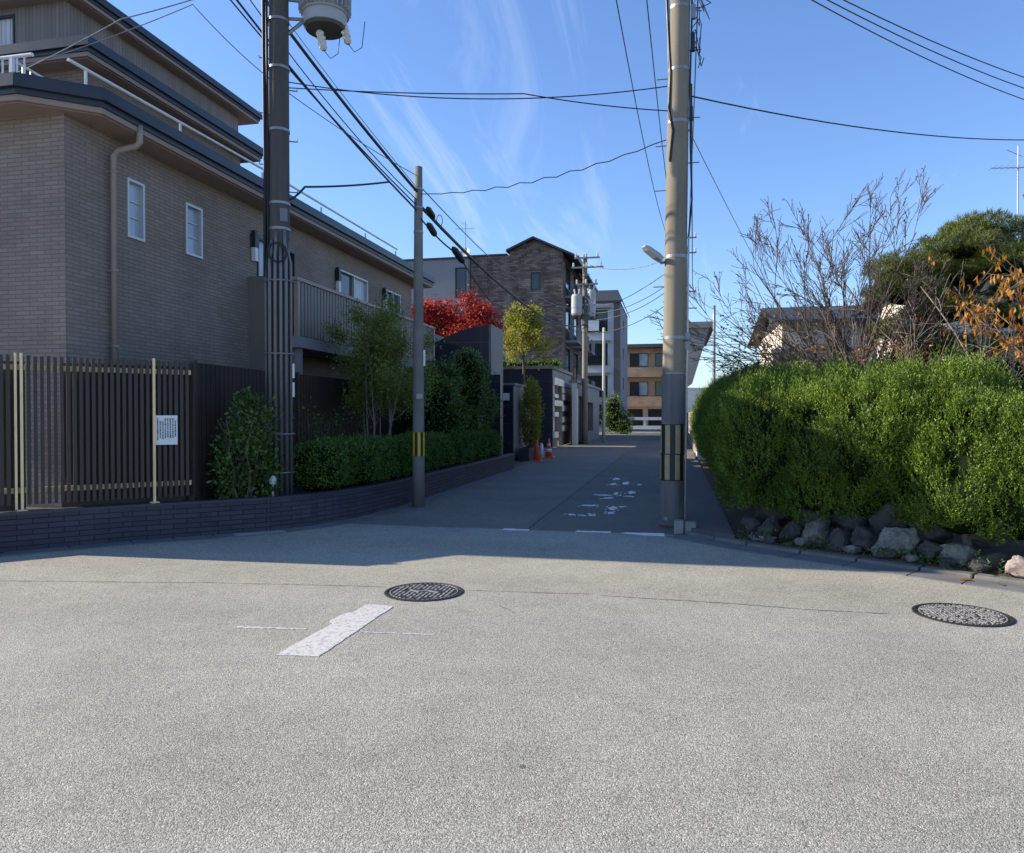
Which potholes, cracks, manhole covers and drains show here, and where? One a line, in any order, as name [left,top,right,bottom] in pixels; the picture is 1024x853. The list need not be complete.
manhole cover [384,582,463,602]
manhole cover [912,603,1016,627]
